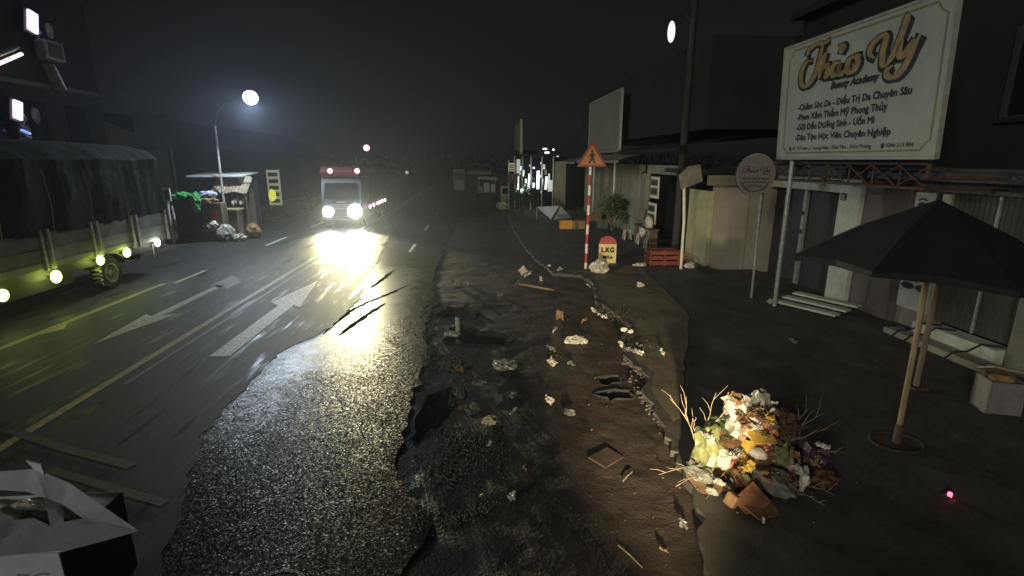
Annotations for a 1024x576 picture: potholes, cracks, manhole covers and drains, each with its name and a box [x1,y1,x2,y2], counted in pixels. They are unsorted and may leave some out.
pothole [592,388,635,403]
pothole [441,323,515,346]
pothole [432,306,480,321]
pothole [594,374,623,386]
crack [323,271,408,335]
pothole [410,386,455,443]
